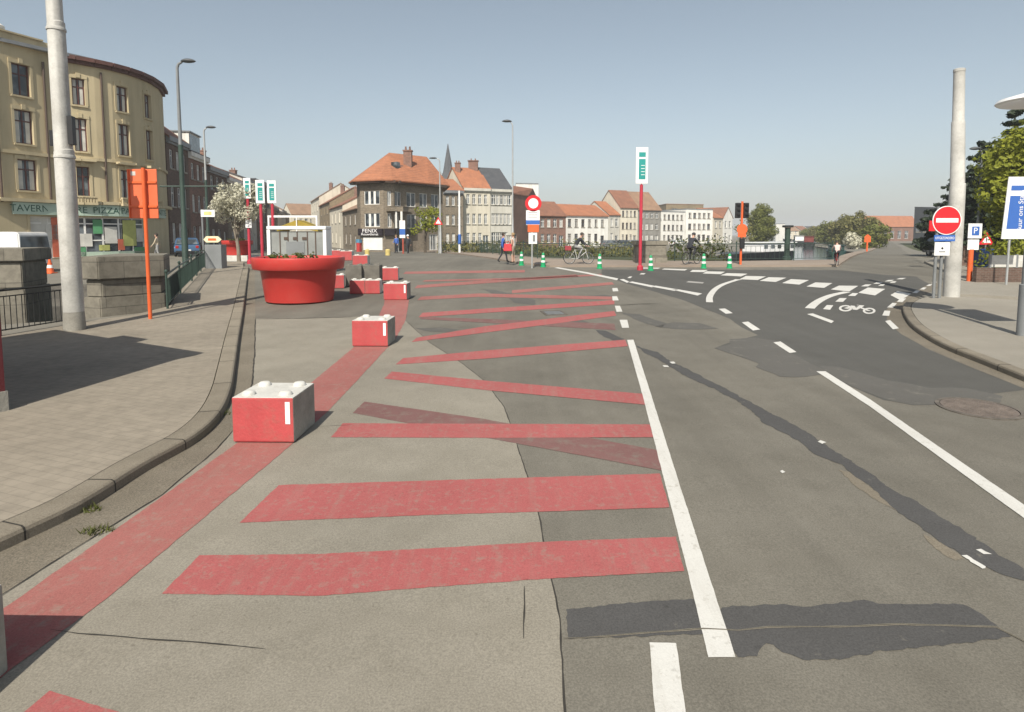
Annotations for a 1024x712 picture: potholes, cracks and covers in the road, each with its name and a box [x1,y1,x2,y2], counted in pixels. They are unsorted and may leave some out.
crack [51,629,265,649]
manhole cover [935,397,1024,421]
crack [413,327,1024,712]
